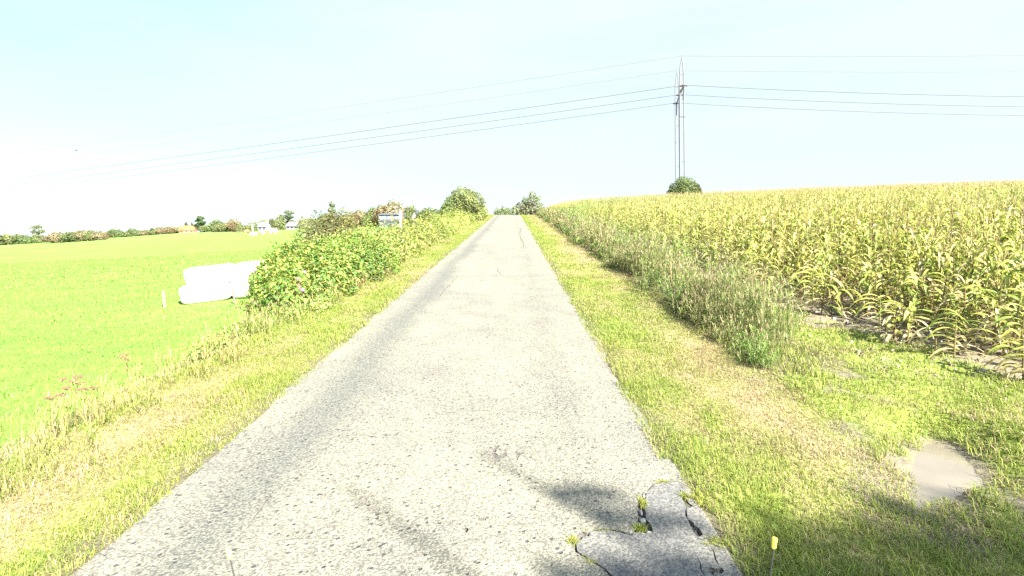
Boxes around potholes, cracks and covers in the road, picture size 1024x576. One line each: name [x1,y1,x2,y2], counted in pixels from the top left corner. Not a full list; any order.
crack [575,529,633,576]
crack [684,533,721,576]
